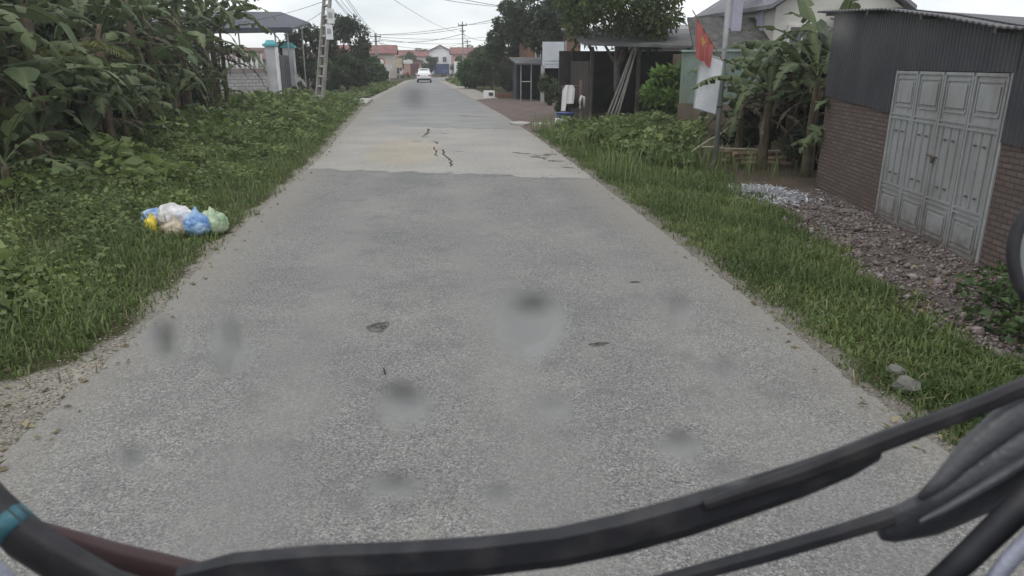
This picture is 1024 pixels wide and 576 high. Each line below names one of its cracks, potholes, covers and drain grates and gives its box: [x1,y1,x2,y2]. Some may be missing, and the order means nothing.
pothole [366,321,390,333]
crack [423,128,453,167]
crack [512,152,573,168]
